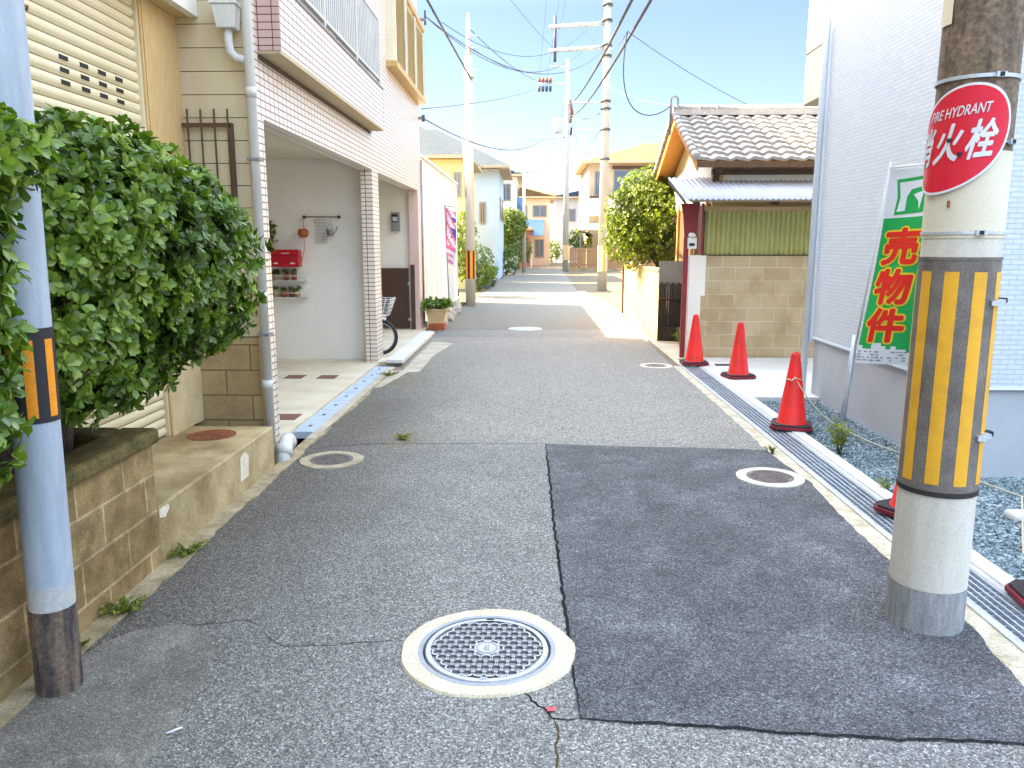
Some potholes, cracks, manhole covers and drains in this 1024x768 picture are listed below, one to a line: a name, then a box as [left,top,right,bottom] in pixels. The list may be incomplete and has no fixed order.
drain grate [736,409,786,434]
drain grate [967,568,1024,644]
manhole cover [736,467,805,488]
crack [186,620,397,646]
drain grate [802,463,879,506]
manhole cover [299,451,364,469]
crack [525,693,577,768]
drain grate [683,366,712,378]
drain grate [764,432,828,464]
drain grate [714,391,756,410]
manhole cover [401,609,576,698]
manhole cover [187,429,237,441]
